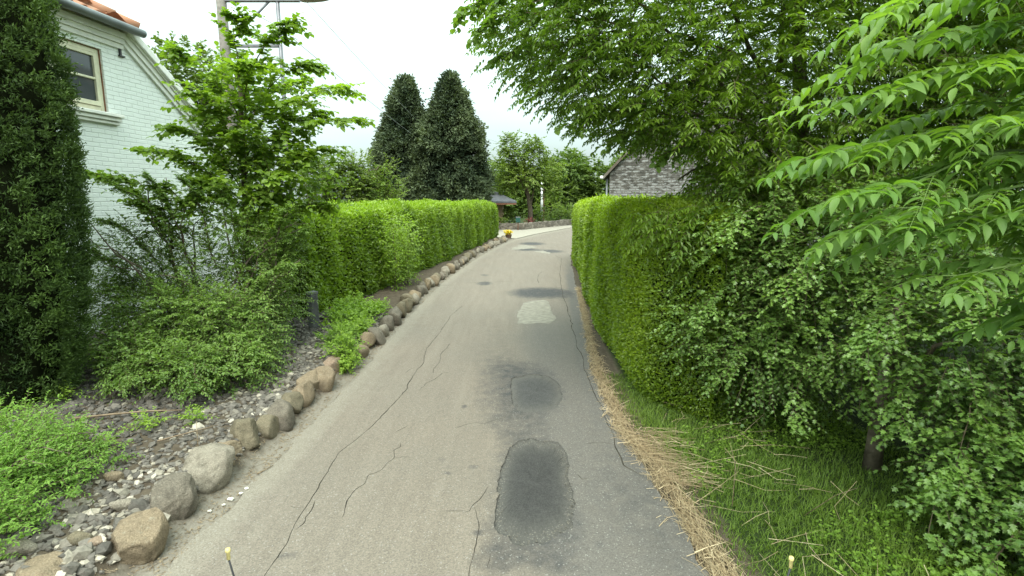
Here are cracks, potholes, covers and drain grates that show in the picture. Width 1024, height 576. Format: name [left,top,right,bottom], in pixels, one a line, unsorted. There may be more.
crack [559,265,641,476]
crack [264,307,461,576]
crack [452,489,490,573]
